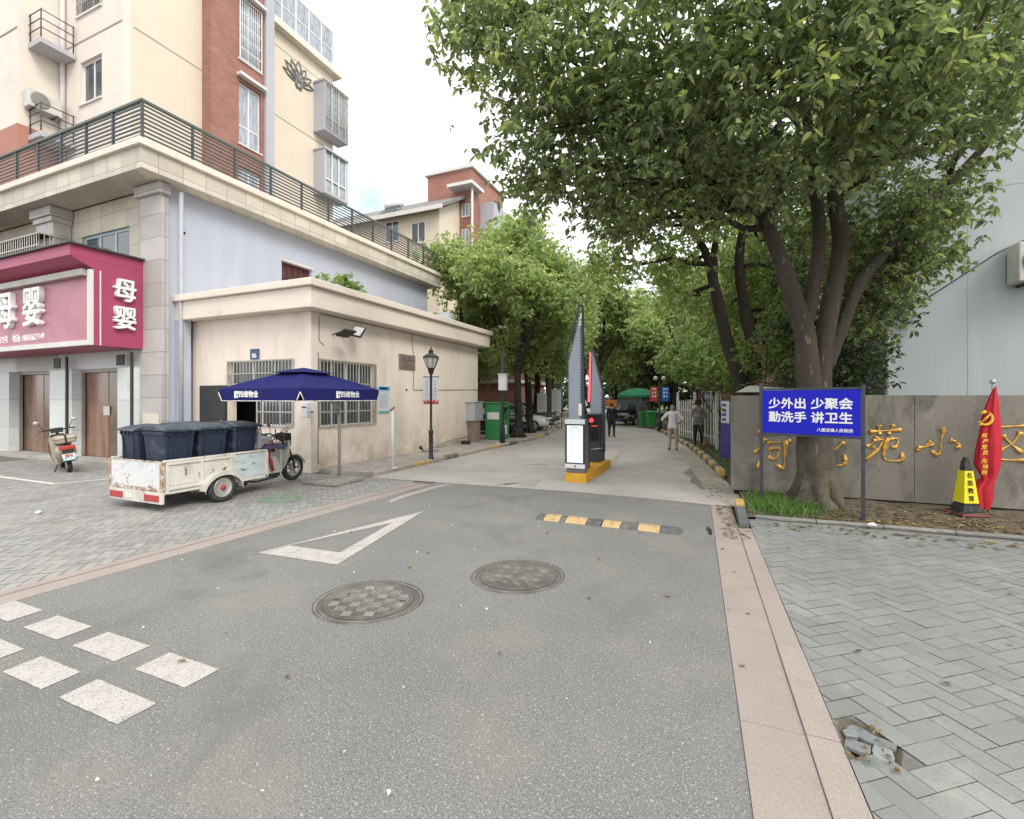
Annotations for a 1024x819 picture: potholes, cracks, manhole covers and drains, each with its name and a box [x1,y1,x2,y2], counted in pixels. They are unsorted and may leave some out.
pothole [837,718,903,772]
manhole cover [312,580,424,625]
manhole cover [471,560,565,595]
